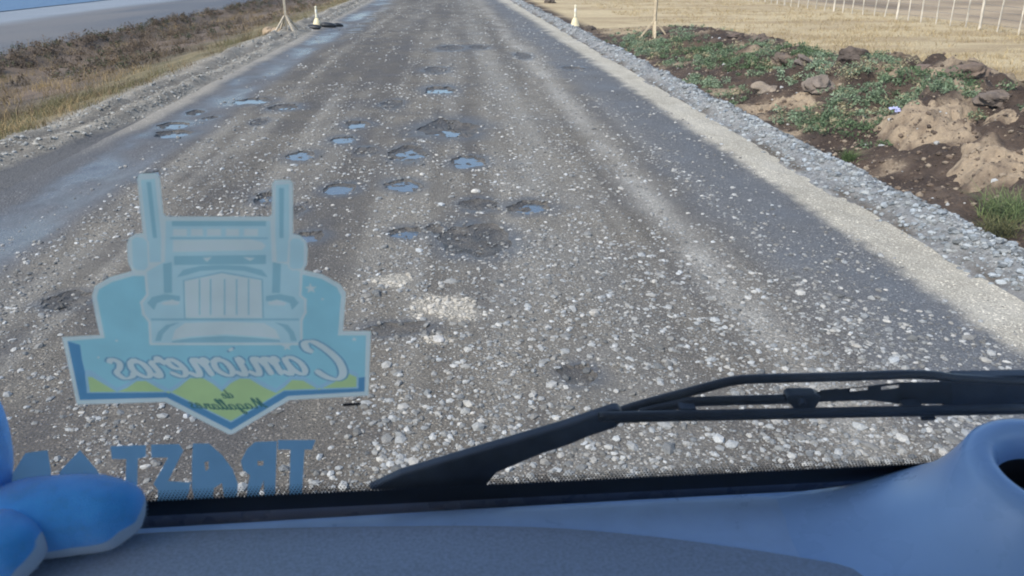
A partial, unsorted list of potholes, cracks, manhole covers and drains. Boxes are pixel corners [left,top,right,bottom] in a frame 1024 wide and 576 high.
pothole [506,200,551,214]
pothole [556,363,598,386]
pothole [417,118,481,138]
pothole [40,289,93,311]
pothole [437,223,512,258]
pothole [285,150,315,161]
pothole [457,198,498,211]
pothole [387,145,428,161]
pothole [387,227,422,240]
pothole [346,121,371,129]
pothole [383,179,422,192]
pothole [323,183,357,195]
